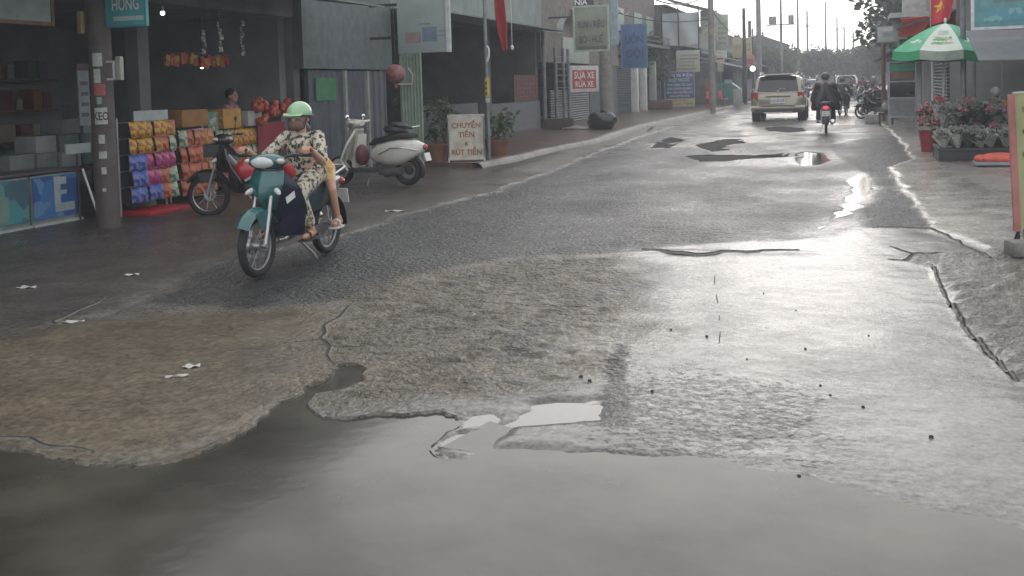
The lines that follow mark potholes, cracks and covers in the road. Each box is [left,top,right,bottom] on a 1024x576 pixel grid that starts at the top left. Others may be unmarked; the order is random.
crack [641,248,799,256]
pothole [677,138,765,153]
crack [285,301,366,365]
crack [0,436,93,453]
pothole [664,152,803,163]
pothole [788,151,835,166]
crack [872,226,1020,382]
pothole [0,360,465,469]
pothole [636,137,696,149]
